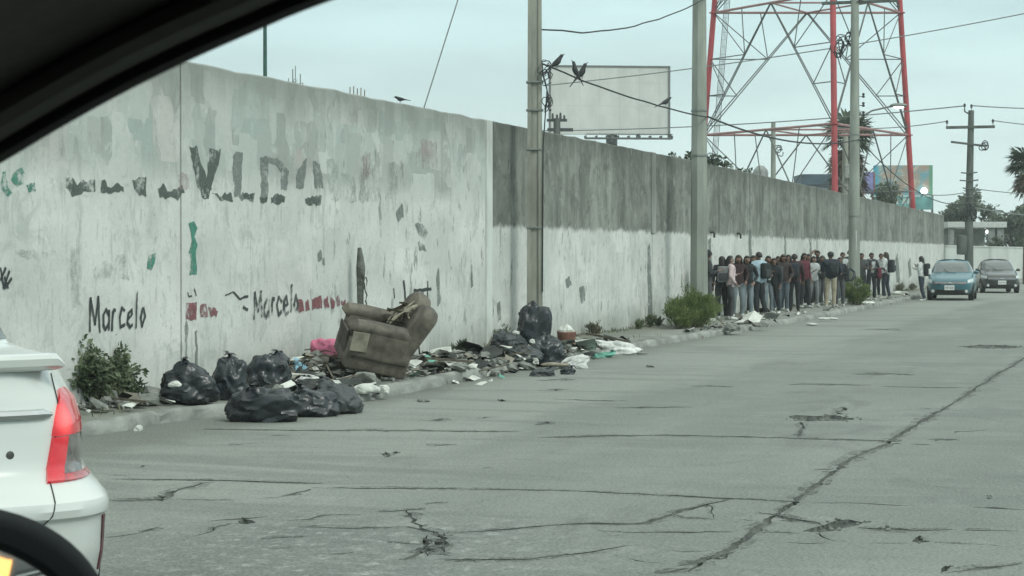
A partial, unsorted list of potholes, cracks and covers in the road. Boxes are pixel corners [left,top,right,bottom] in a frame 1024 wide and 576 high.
crack [196,358,1024,574]
pothole [786,413,862,422]
pothole [804,517,871,534]
crack [109,465,324,502]
